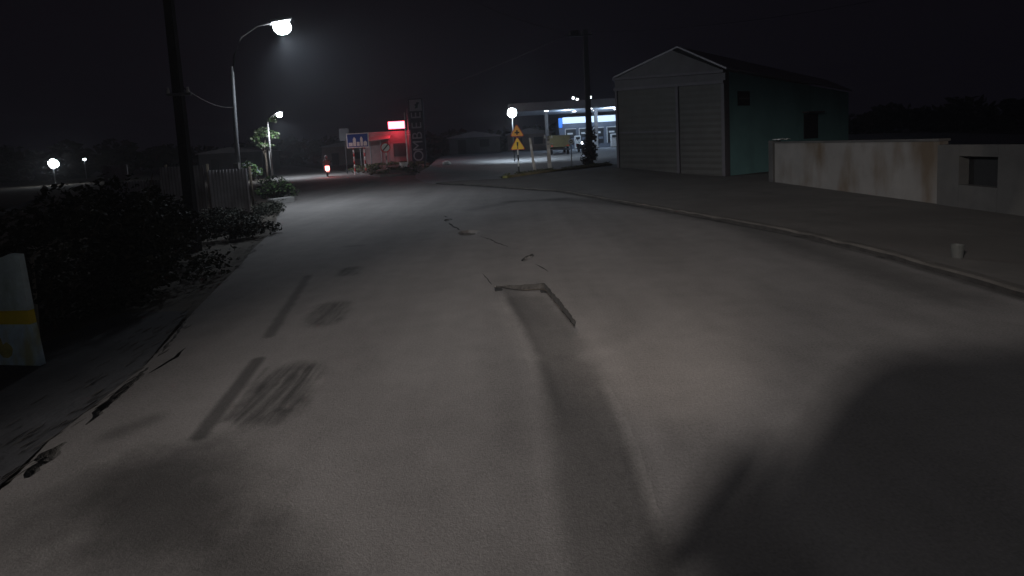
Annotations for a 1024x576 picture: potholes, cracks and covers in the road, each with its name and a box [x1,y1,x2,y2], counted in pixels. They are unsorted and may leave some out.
crack [23,320,186,478]
